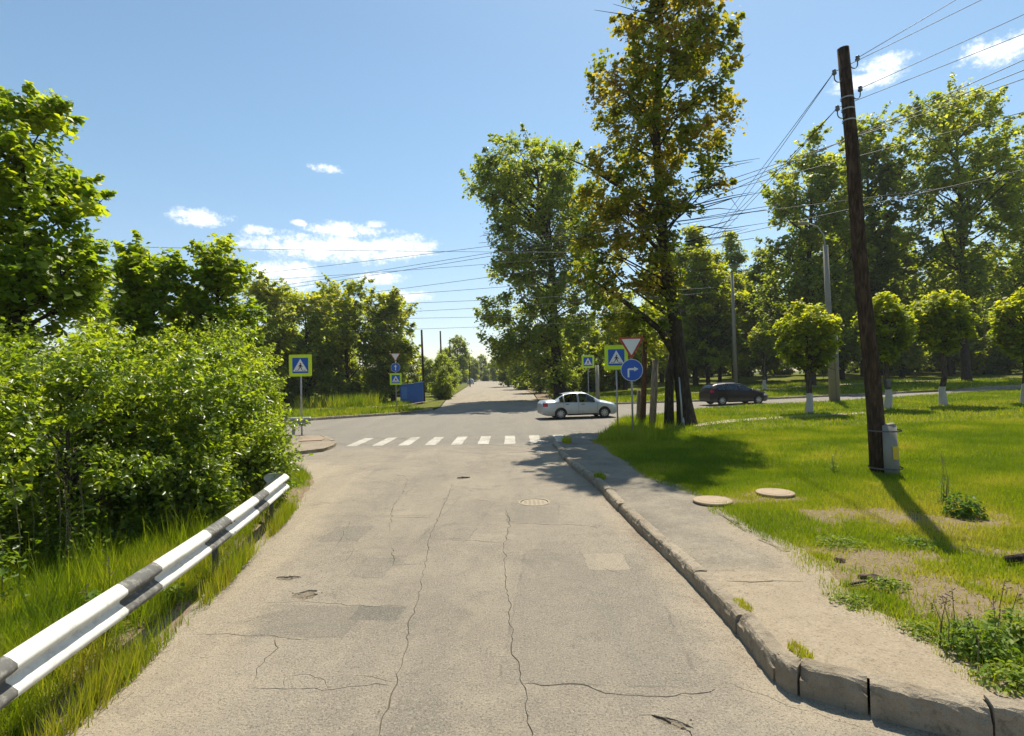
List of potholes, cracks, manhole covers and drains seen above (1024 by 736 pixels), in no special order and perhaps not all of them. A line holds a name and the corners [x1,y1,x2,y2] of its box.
manhole cover [693,496,733,507]
manhole cover [518,498,550,506]
pothole [291,590,322,600]
crack [208,475,714,736]
manhole cover [755,488,795,498]
pothole [651,715,693,736]
